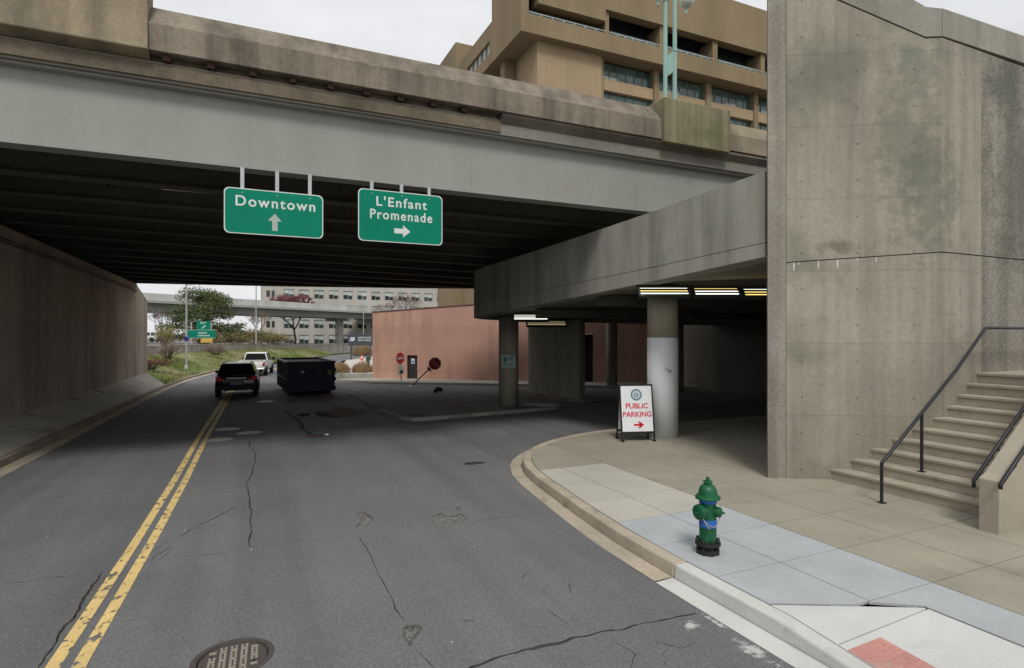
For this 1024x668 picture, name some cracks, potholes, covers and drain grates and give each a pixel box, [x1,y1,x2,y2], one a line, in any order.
pothole [356,512,373,529]
crack [38,572,102,668]
manhole cover [189,637,275,668]
crack [467,590,695,668]
crack [152,440,257,564]
pothole [430,513,467,525]
crack [359,537,406,623]
pothole [403,624,423,647]
